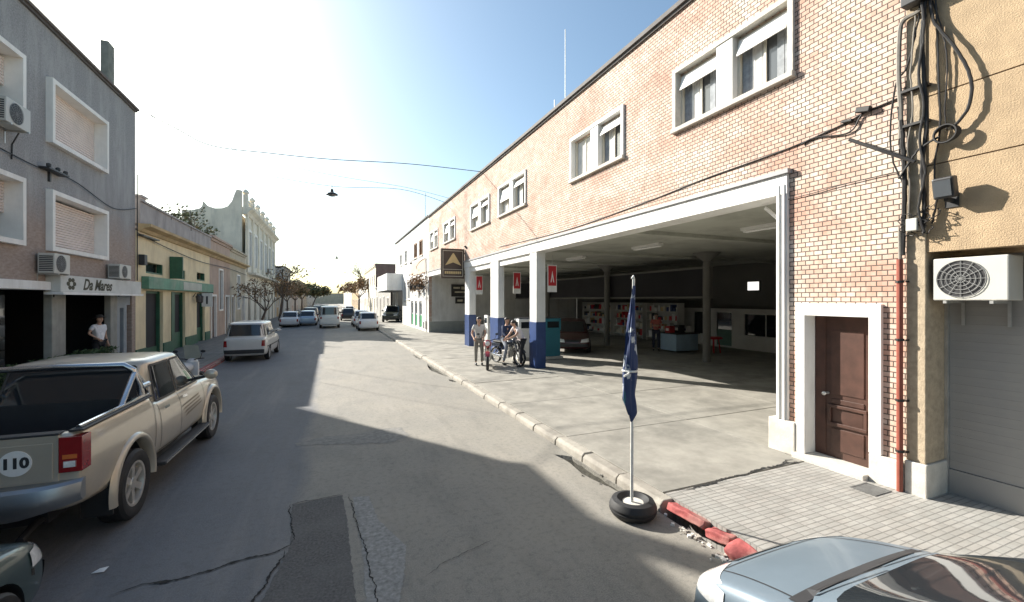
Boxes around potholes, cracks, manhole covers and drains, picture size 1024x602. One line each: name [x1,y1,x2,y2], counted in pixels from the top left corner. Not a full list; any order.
crack [112,494,378,602]
utility cover [850,482,892,497]
crack [675,459,798,491]
